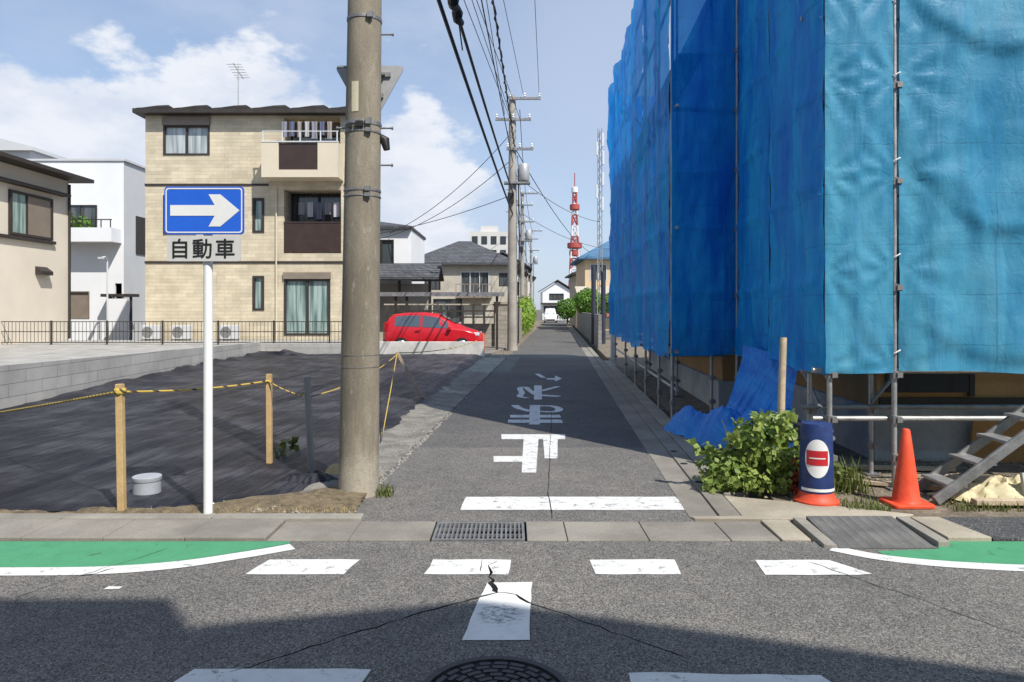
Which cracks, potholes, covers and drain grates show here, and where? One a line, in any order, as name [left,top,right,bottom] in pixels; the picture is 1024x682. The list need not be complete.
drain grate [430,522,526,541]
crack [243,562,689,669]
manhole cover [423,656,568,682]
